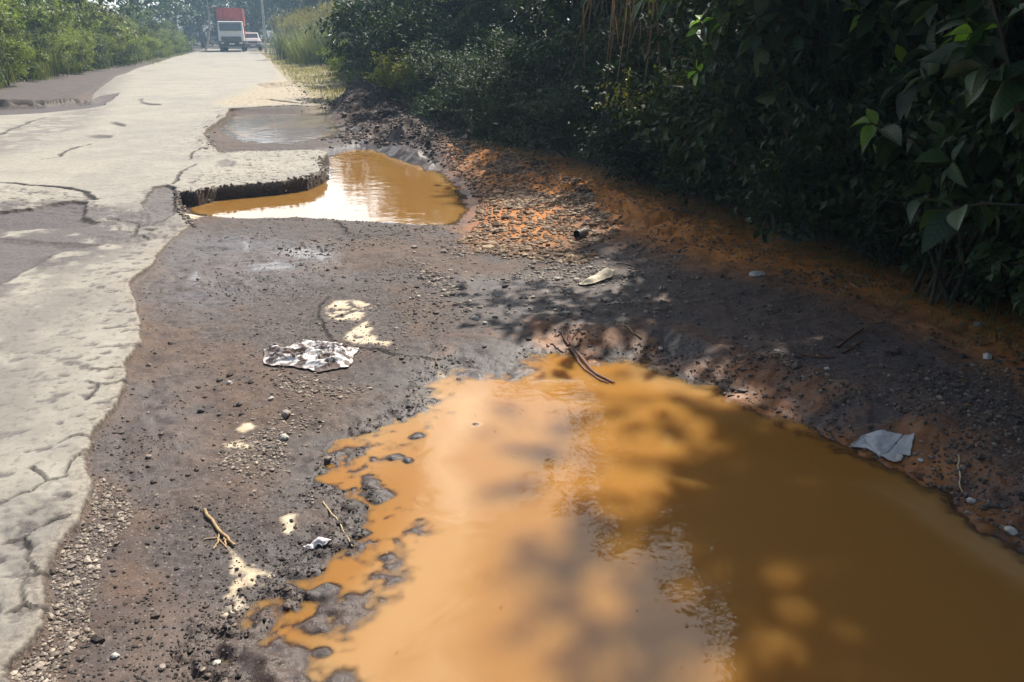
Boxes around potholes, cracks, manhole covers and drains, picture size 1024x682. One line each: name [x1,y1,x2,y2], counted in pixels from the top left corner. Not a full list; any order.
crack [0,182,100,200]
crack [107,214,174,241]
pothole [181,147,477,234]
crack [0,432,95,616]
crack [0,118,92,159]
